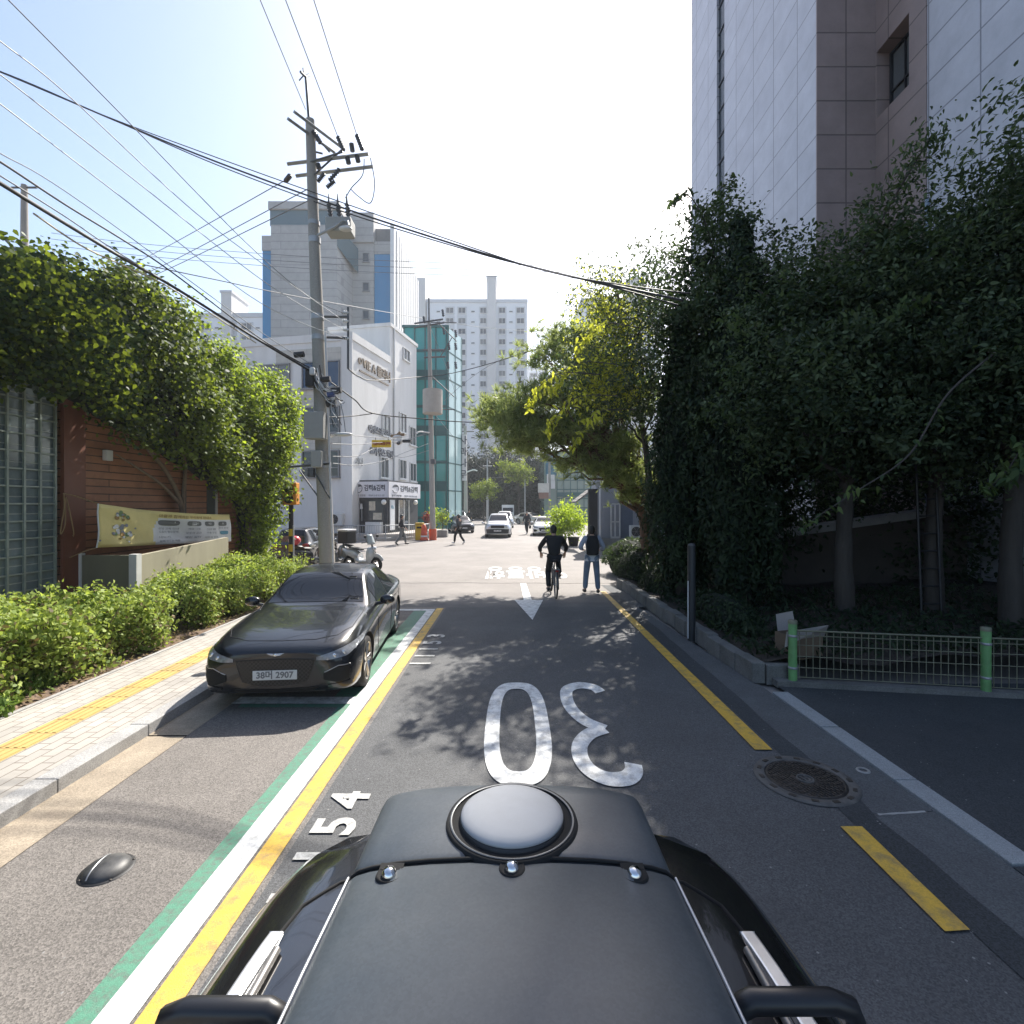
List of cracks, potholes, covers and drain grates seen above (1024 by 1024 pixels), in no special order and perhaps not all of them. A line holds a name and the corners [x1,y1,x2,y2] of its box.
manhole cover [753,756,862,807]
